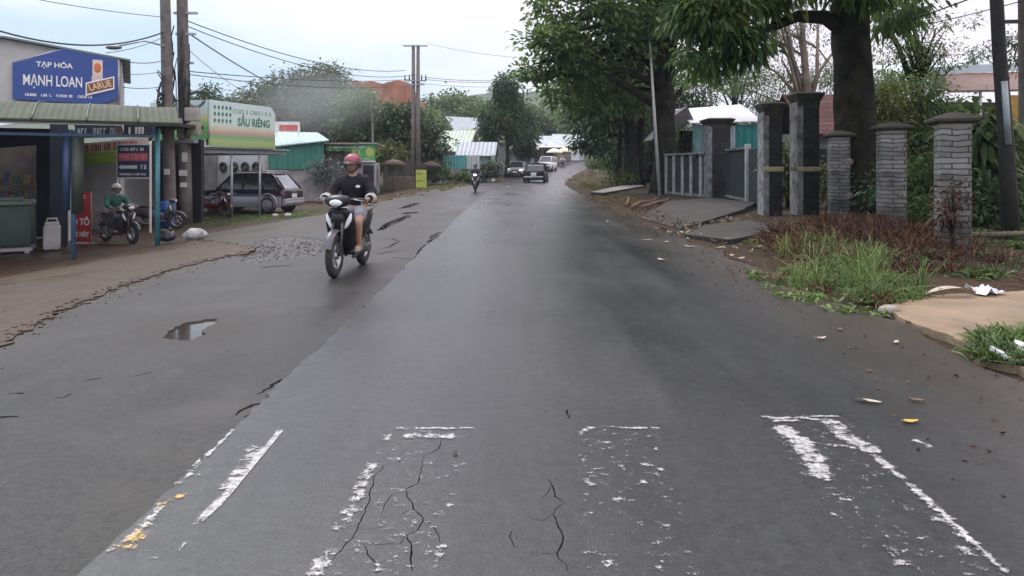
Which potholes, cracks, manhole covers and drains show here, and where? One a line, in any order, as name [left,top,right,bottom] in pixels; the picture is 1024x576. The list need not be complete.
crack [333,442,441,573]
pothole [164,319,217,341]
crack [548,479,568,572]
crack [236,380,281,418]
